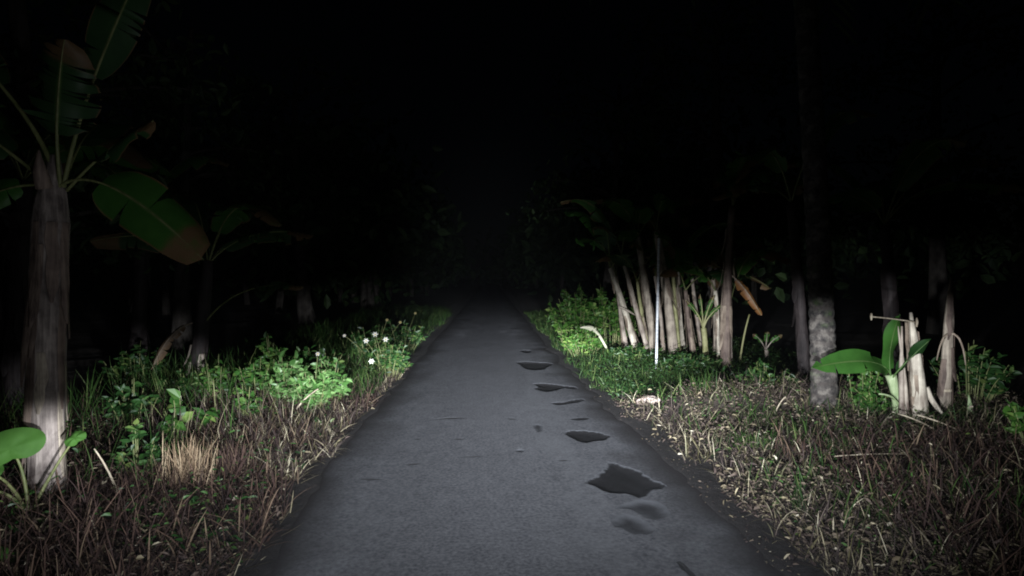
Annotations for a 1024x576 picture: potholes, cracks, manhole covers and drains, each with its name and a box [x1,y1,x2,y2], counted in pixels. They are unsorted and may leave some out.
pothole [584,462,667,498]
pothole [610,513,658,535]
pothole [533,383,578,392]
pothole [564,430,611,443]
pothole [516,361,554,370]
pothole [616,499,671,520]
